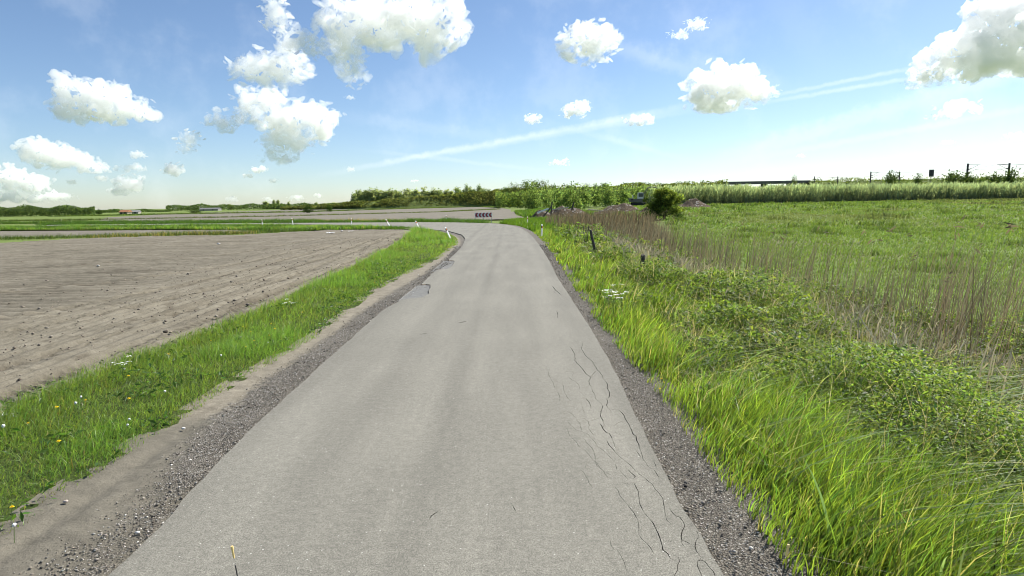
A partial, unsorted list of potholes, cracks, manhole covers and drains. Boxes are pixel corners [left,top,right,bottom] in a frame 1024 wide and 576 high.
pothole [397,284,430,302]
crack [548,345,715,576]
